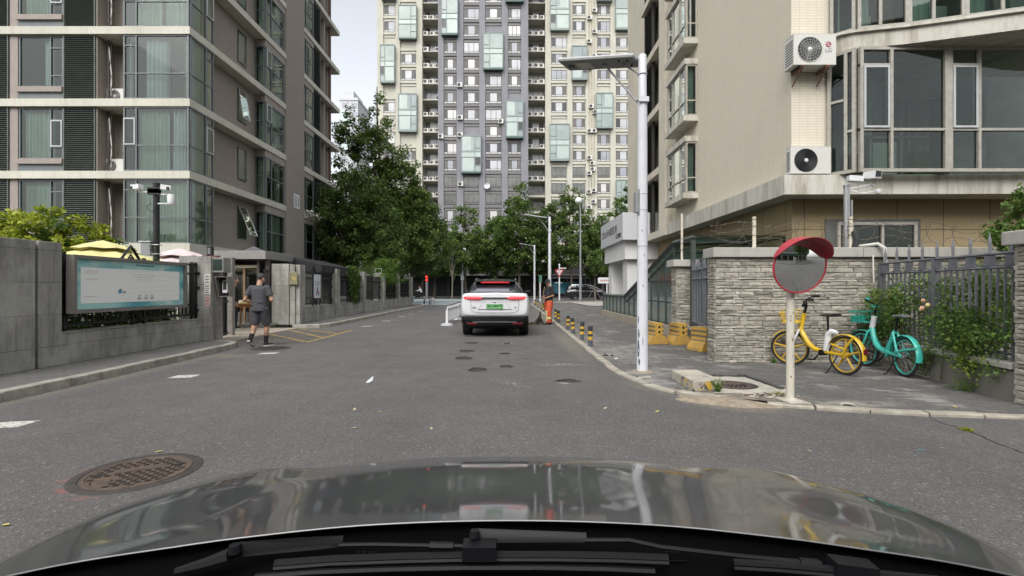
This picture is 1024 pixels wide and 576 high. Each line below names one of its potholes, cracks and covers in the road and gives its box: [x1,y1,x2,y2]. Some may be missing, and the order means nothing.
manhole cover [64,453,203,495]
crack [930,418,1024,453]
